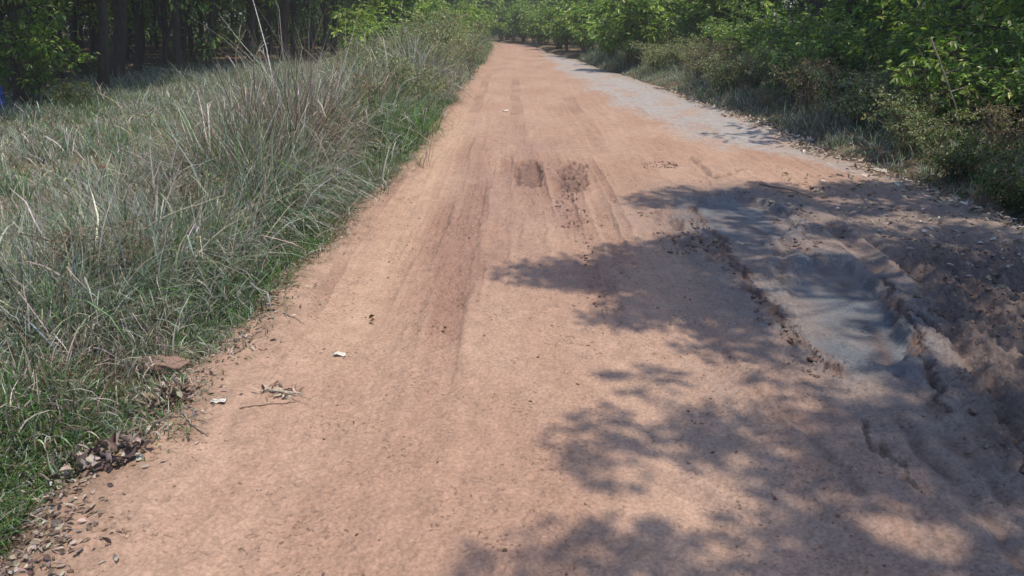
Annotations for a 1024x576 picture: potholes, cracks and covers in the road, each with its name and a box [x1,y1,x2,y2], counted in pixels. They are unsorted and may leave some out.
pothole [551,161,592,197]
pothole [778,256,925,367]
pothole [511,158,548,189]
